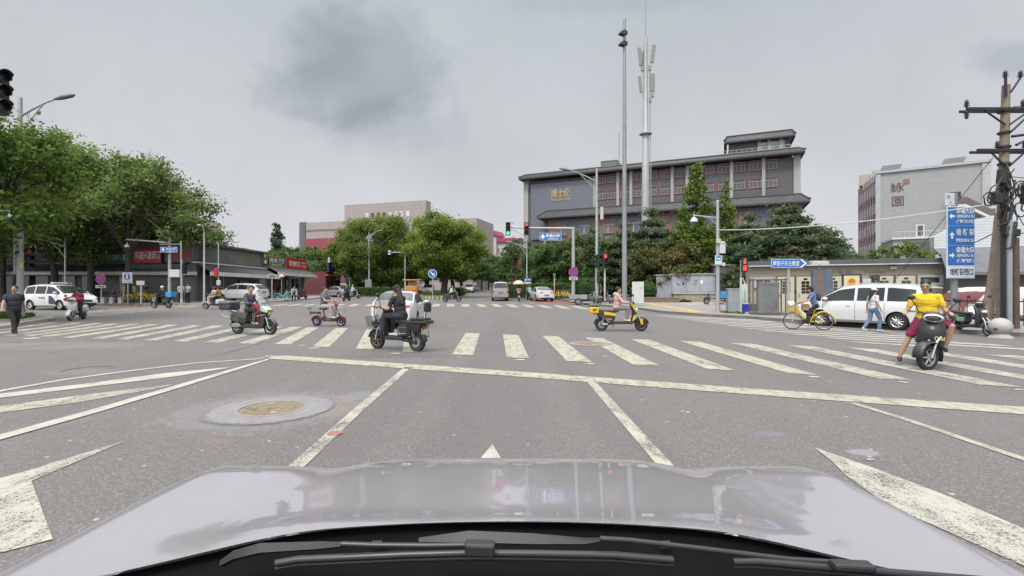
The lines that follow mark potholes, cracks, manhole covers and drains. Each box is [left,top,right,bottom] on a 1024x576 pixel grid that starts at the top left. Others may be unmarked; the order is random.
manhole cover [202,396,336,425]
